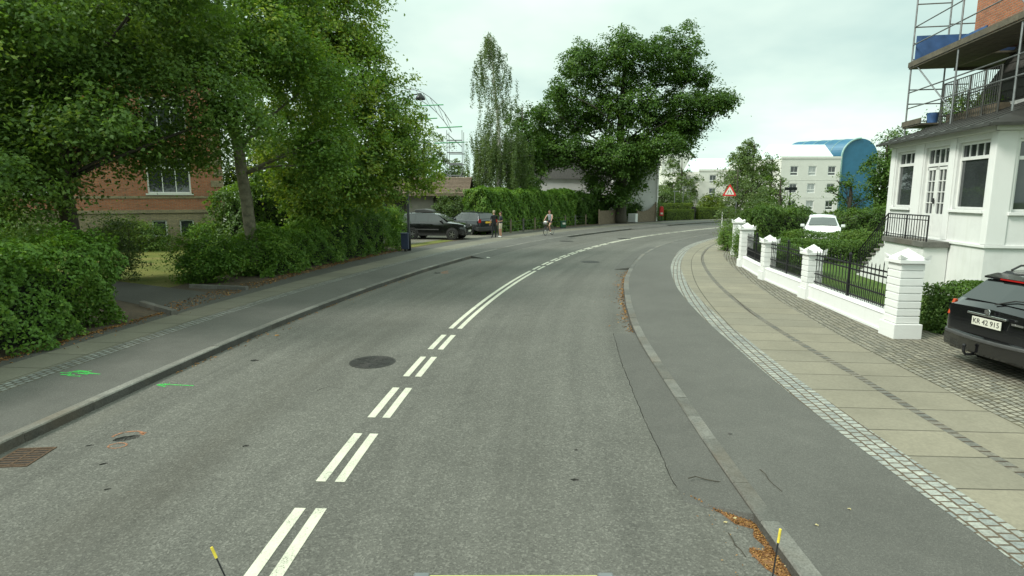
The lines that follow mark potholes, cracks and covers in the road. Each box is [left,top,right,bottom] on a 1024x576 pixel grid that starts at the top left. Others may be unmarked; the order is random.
manhole cover [349,356,395,369]
drain grate [0,447,57,468]
